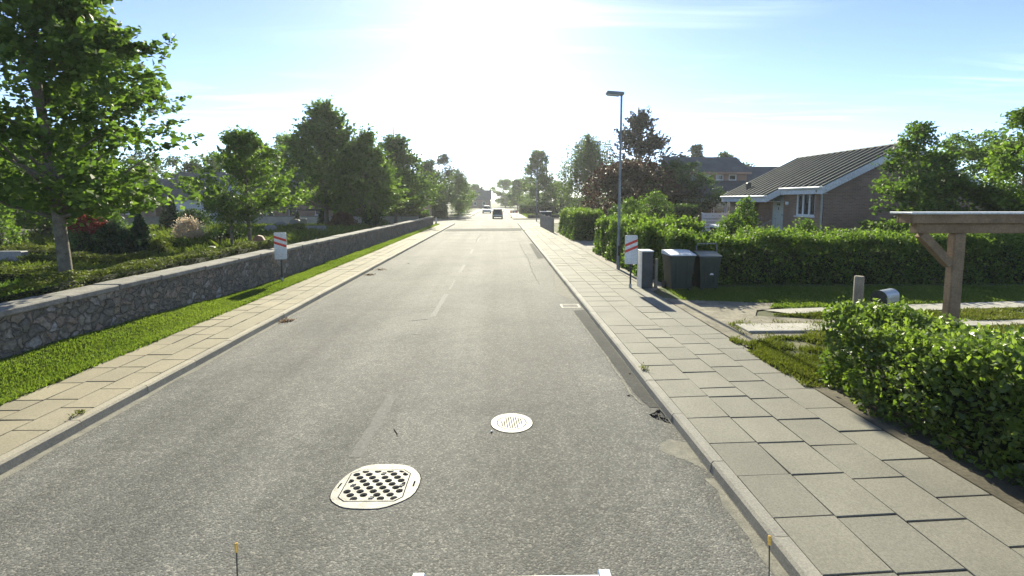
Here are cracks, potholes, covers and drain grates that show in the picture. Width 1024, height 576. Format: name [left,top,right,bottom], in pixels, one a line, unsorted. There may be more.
pothole [649,409,671,424]
